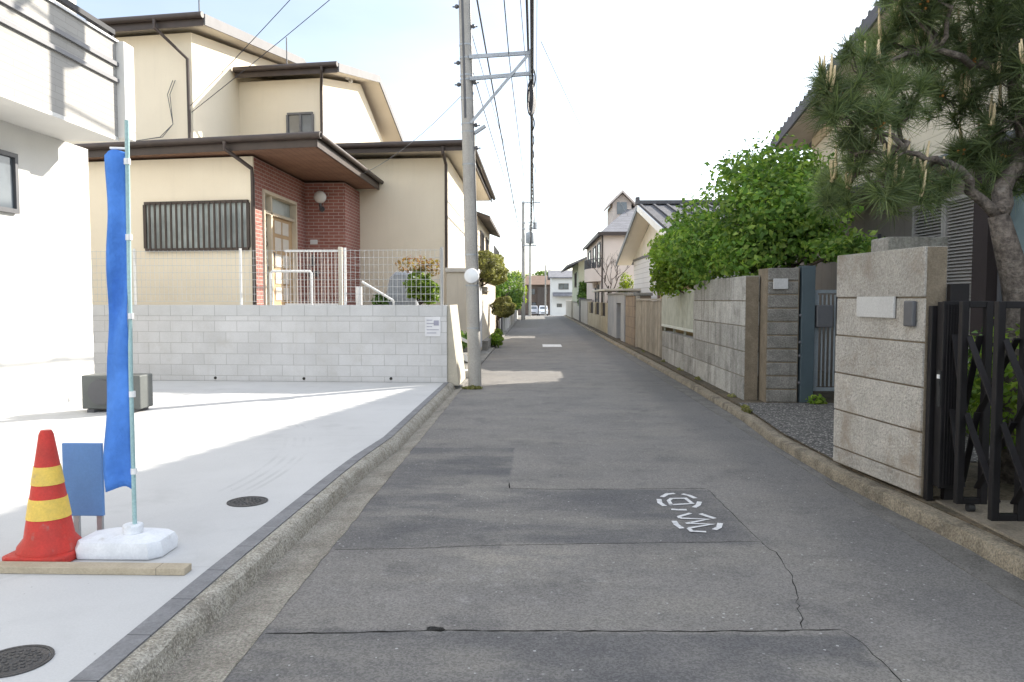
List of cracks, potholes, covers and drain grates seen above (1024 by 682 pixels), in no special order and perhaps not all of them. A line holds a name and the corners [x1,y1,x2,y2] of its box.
manhole cover [227,496,268,507]
manhole cover [0,644,55,678]
crack [762,543,803,629]
crack [844,631,902,682]
